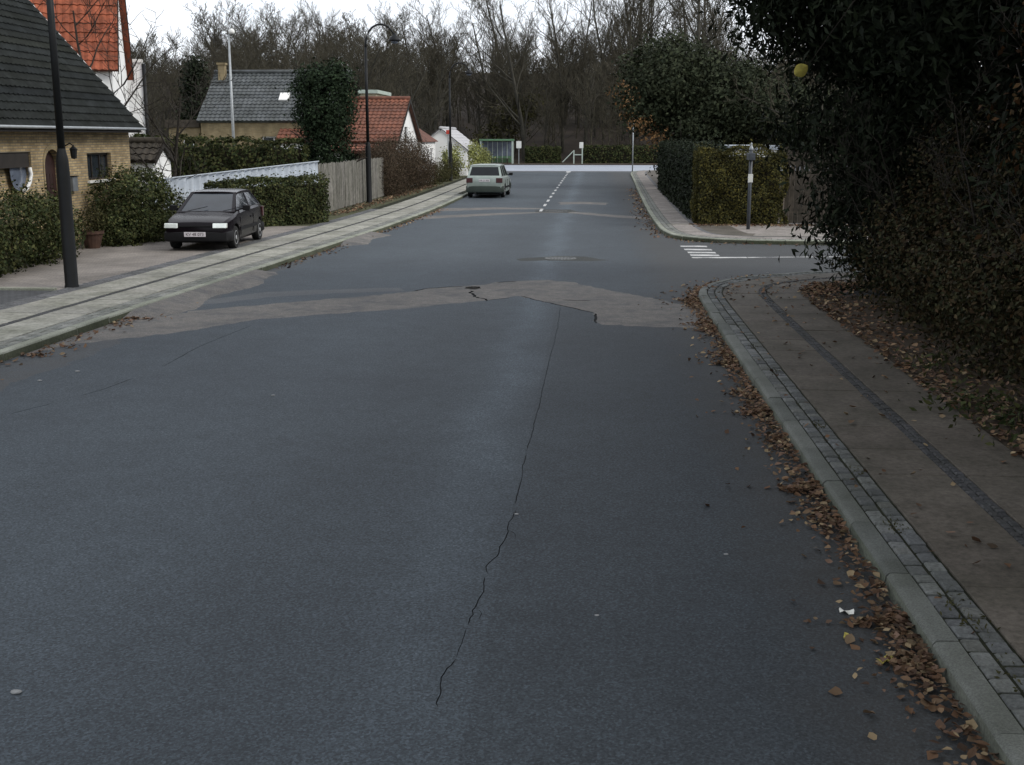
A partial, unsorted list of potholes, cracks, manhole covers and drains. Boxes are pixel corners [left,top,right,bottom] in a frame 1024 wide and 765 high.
crack [436,308,561,706]
crack [15,327,247,413]
crack [416,281,597,323]
